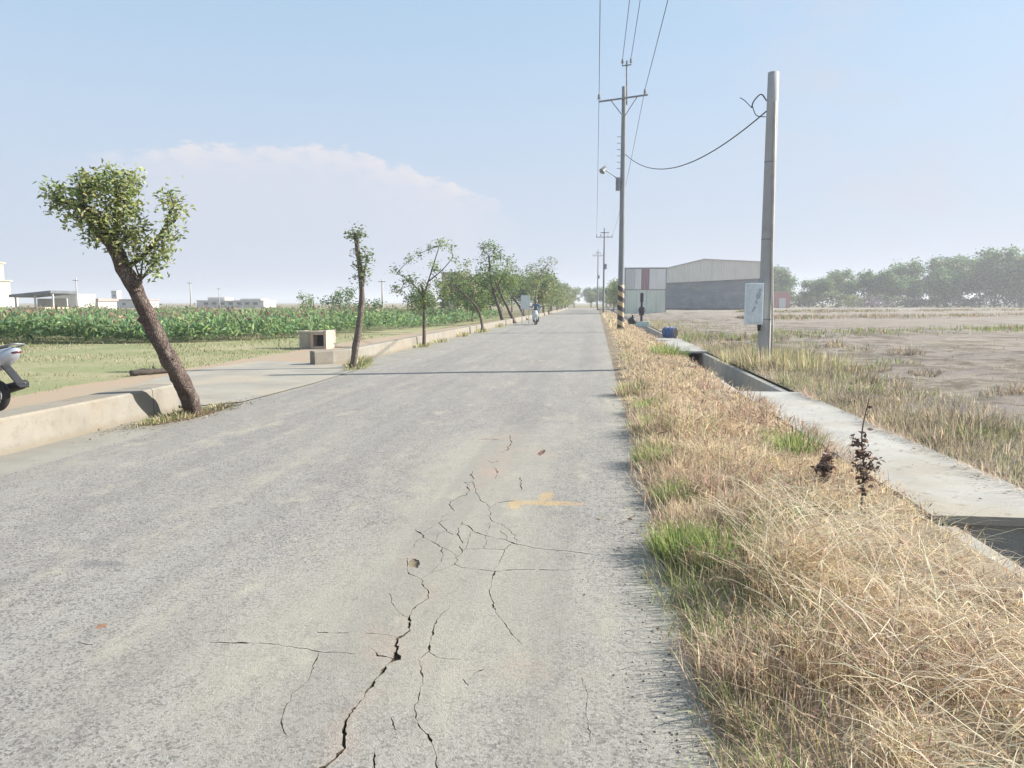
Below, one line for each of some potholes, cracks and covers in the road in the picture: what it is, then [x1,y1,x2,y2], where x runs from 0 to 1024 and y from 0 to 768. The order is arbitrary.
crack [413,436,598,641]
crack [211,558,461,768]
